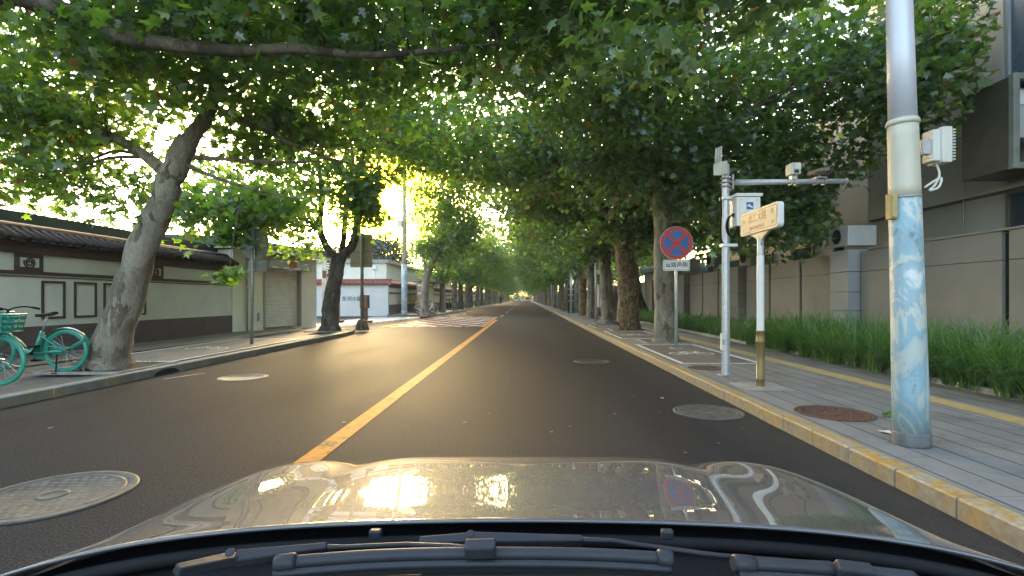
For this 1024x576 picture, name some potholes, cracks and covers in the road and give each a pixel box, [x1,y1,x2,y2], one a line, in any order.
manhole cover [0,471,140,525]
manhole cover [793,405,877,422]
manhole cover [673,404,745,420]
